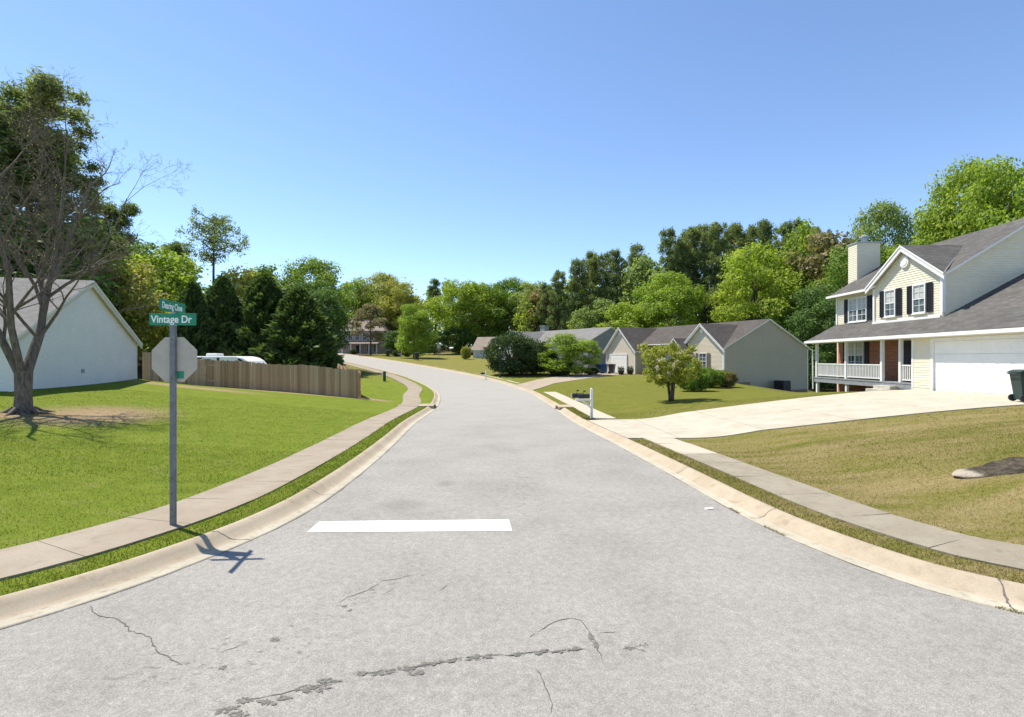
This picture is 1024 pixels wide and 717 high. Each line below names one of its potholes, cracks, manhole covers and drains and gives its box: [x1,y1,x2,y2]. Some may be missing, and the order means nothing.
crack [90,606,179,663]
crack [998,578,1014,609]
crack [215,618,648,717]
